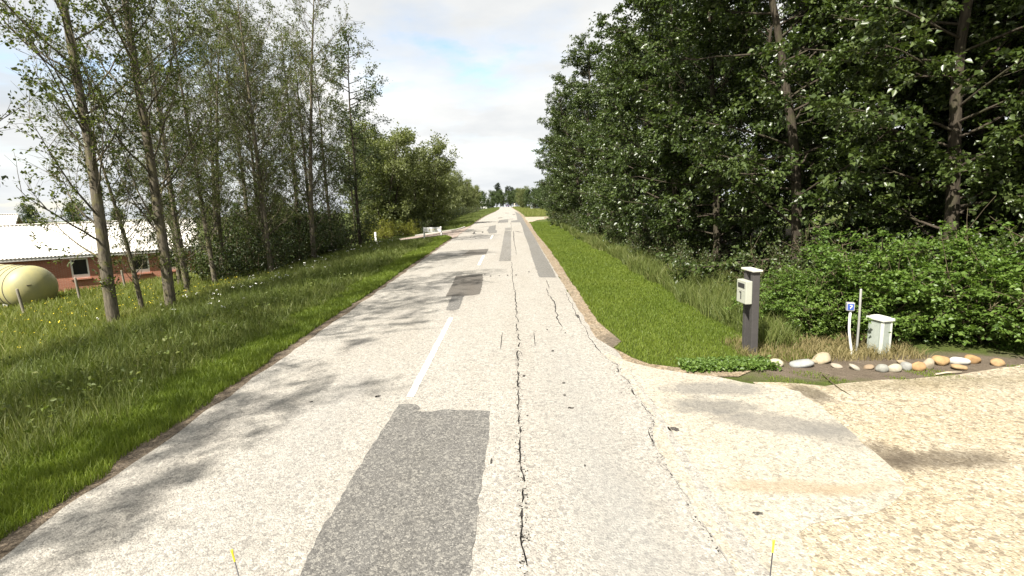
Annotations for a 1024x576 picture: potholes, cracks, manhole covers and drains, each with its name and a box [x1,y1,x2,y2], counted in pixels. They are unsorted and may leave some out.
crack [500,267,728,576]
